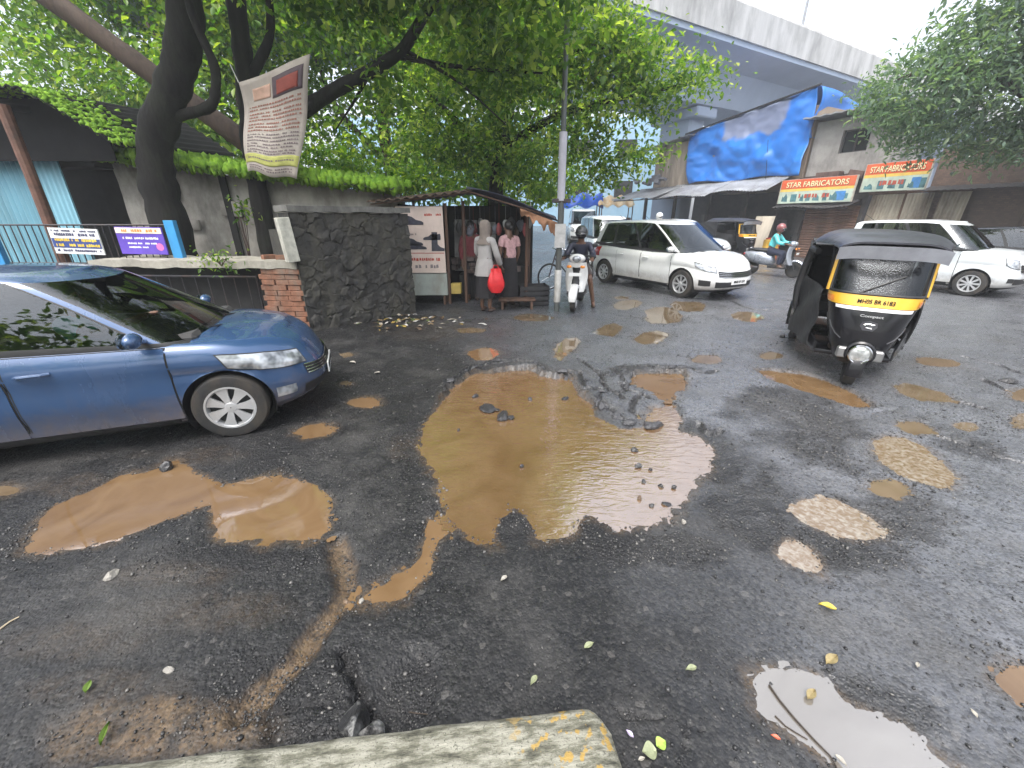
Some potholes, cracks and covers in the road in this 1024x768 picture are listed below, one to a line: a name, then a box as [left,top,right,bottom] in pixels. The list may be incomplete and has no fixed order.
pothole [669,300,708,312]
pothole [552,337,585,362]
pothole [783,491,899,545]
pothole [740,655,969,768]
pothole [643,306,686,324]
pothole [412,363,722,552]
pothole [769,532,837,579]
pothole [754,367,876,407]
pothole [867,432,967,492]
pothole [15,456,344,557]
